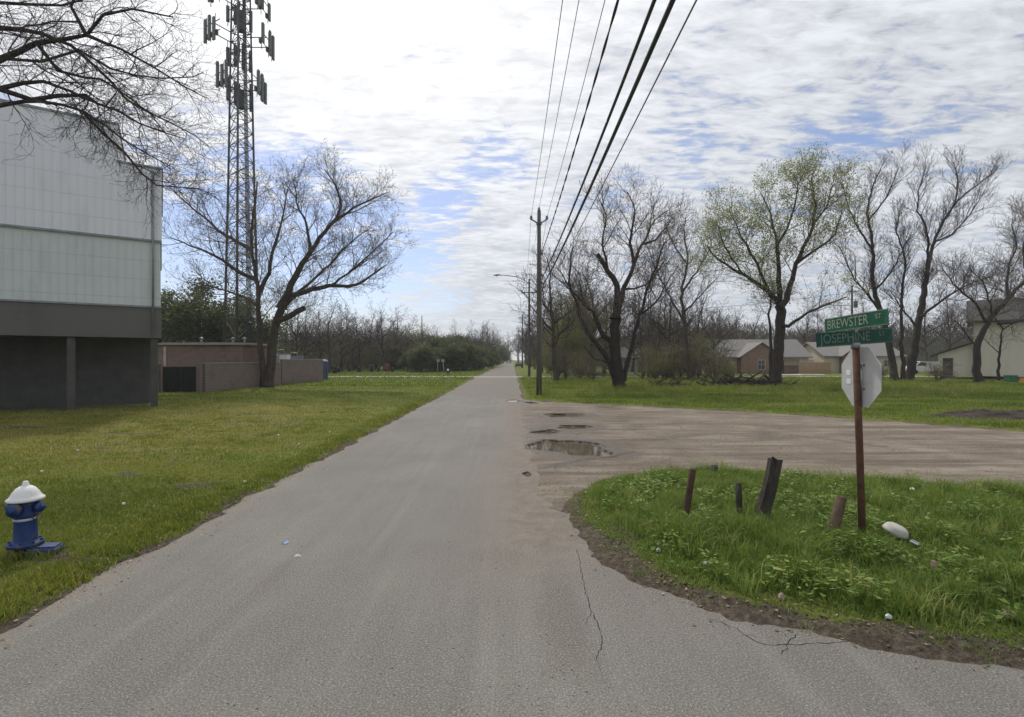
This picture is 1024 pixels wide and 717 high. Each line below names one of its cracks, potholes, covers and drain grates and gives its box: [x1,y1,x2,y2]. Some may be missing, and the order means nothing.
crack [711,619,847,654]
crack [576,549,604,680]
pothole [523,439,618,458]
